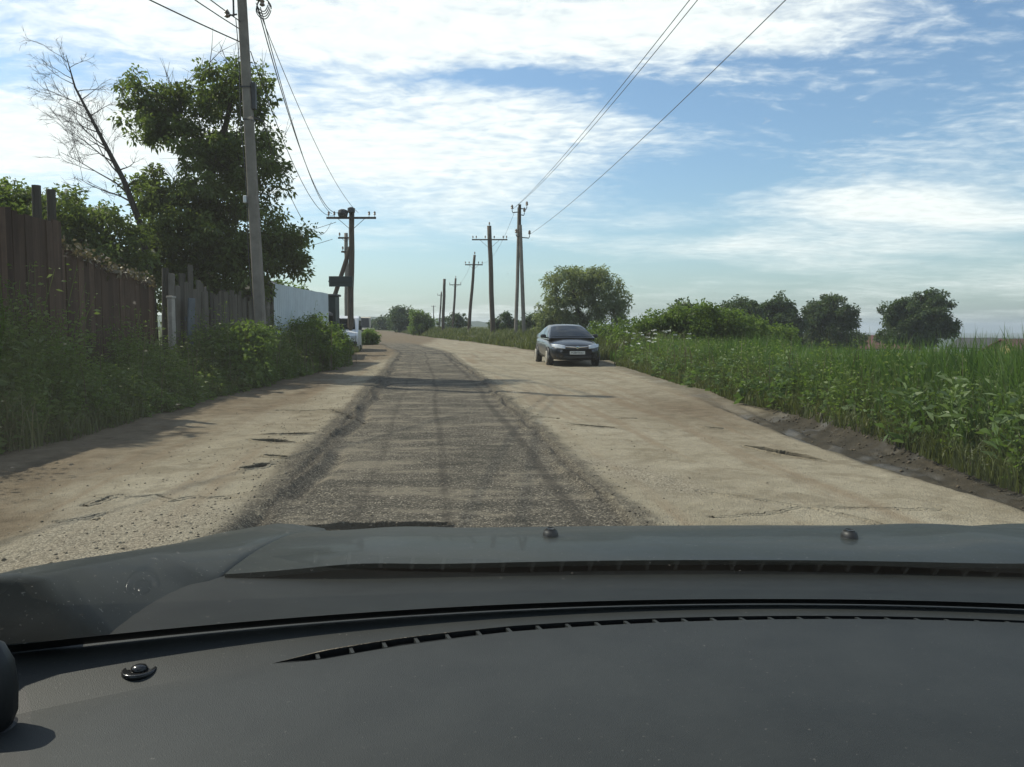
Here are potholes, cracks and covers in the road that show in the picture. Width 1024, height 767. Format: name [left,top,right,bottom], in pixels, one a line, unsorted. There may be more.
pothole [235,462,277,470]
crack [697,489,940,525]
crack [58,493,231,523]
